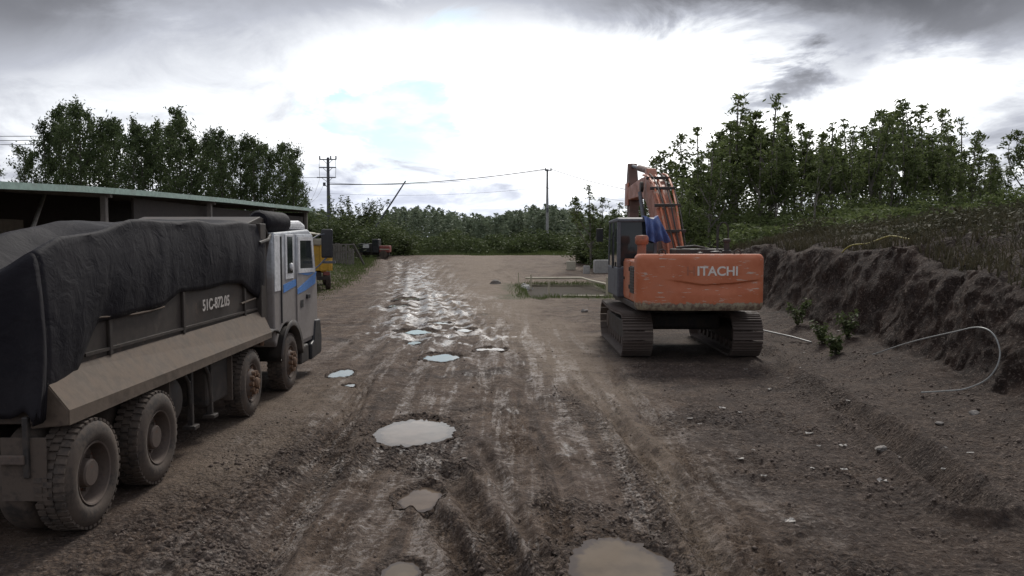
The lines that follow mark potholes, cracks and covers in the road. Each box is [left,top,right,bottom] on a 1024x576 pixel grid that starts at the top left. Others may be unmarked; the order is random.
pothole [389,476,451,519]
pothole [376,555,428,576]
pothole [472,345,510,353]
pothole [359,412,468,451]
pothole [325,368,357,378]
pothole [392,327,440,336]
pothole [417,351,466,363]
pothole [551,524,689,576]
